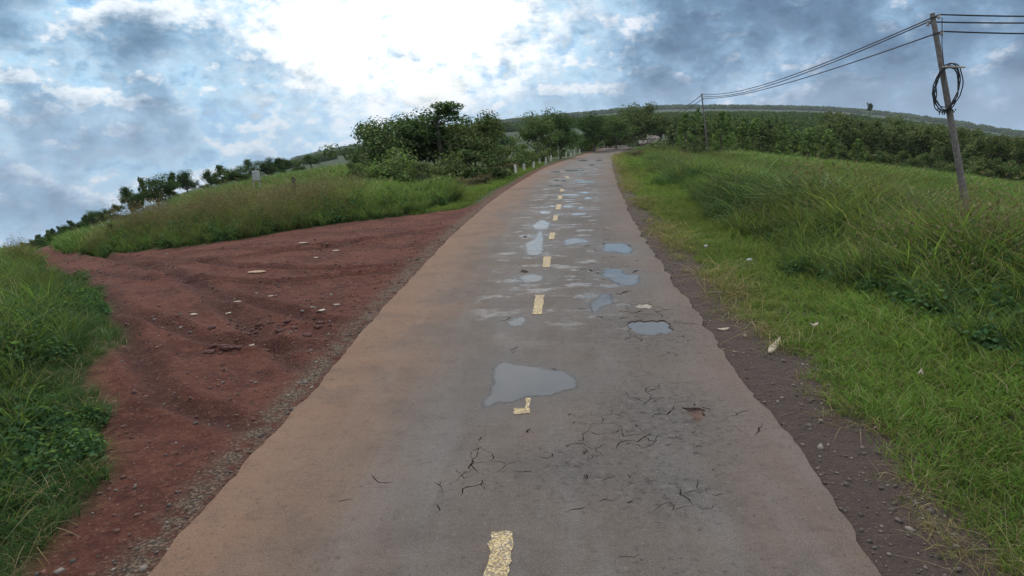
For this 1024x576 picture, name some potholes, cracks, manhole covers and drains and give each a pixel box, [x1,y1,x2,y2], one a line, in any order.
crack [436,382,762,511]
